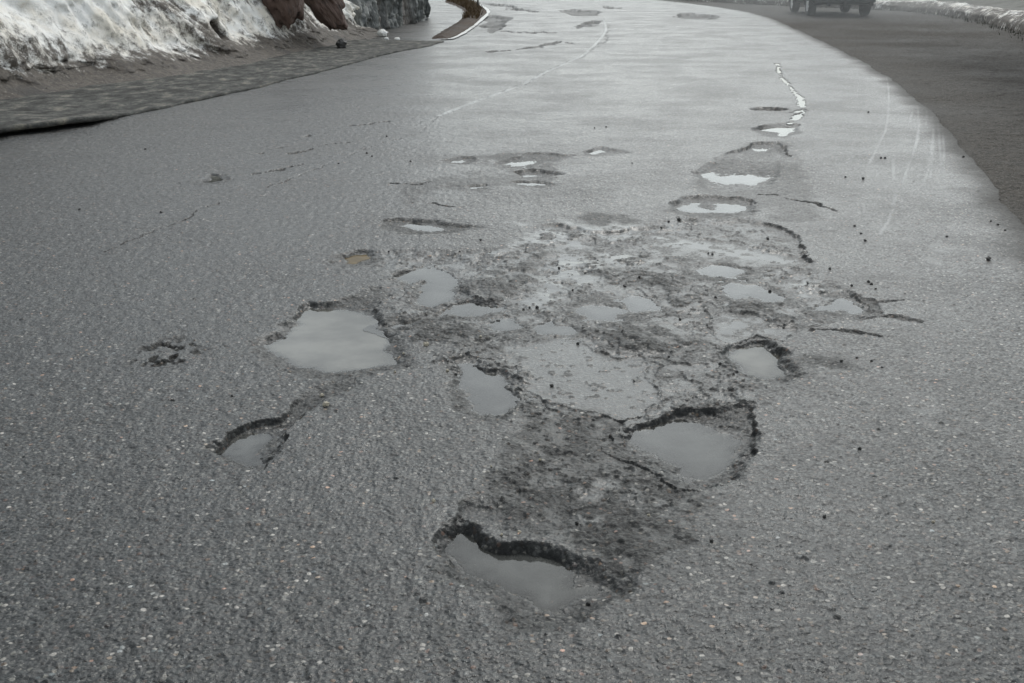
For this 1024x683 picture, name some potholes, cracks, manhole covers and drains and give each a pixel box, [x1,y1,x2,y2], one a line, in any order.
pothole [748,121,806,139]
pothole [660,193,764,220]
pothole [364,215,858,578]
